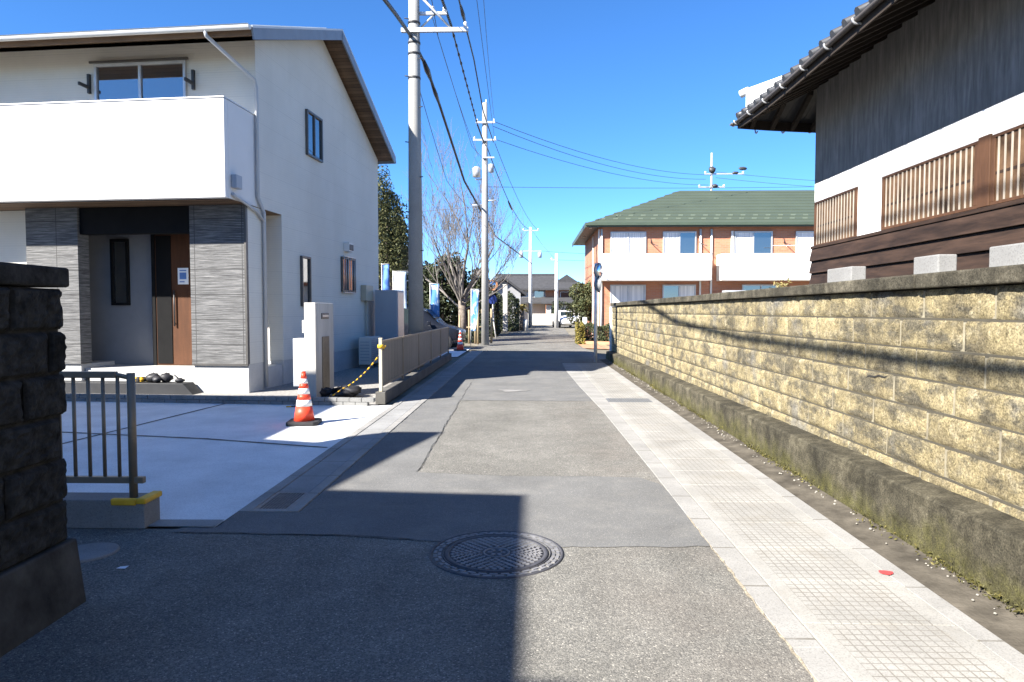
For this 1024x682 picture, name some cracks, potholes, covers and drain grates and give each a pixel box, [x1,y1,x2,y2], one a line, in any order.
manhole cover [78,542,120,563]
manhole cover [429,530,564,579]
drain grate [255,492,309,510]
